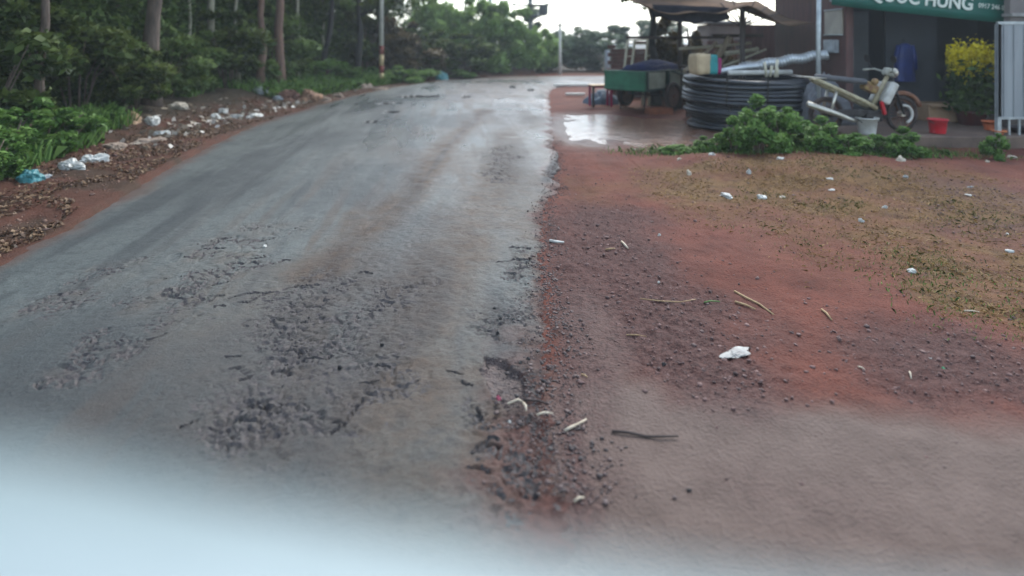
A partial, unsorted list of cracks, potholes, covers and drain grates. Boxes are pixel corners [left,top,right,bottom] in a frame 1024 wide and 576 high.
pothole [479,356,527,409]
